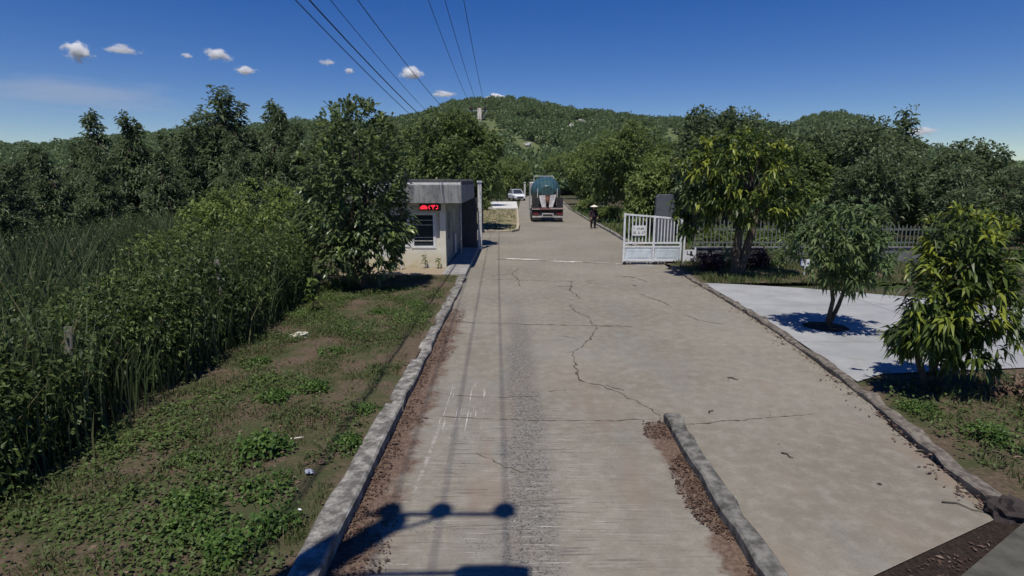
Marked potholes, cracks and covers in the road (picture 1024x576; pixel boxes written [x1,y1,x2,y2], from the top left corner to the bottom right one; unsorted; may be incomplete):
crack [460,269,660,416]
